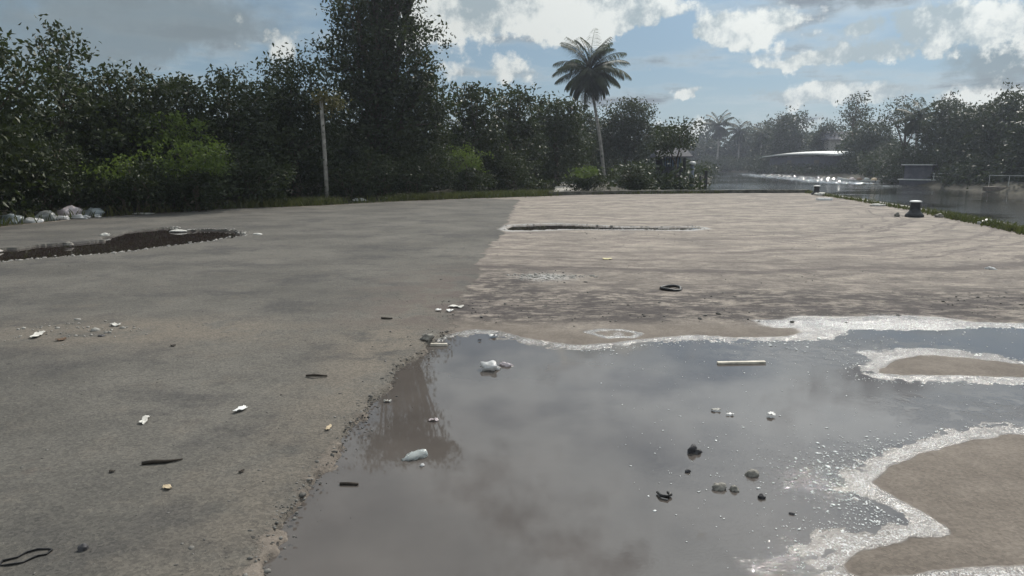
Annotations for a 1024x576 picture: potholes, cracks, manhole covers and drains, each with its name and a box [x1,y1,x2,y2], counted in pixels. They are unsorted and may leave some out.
pothole [0,226,247,262]
pothole [188,320,1024,576]
